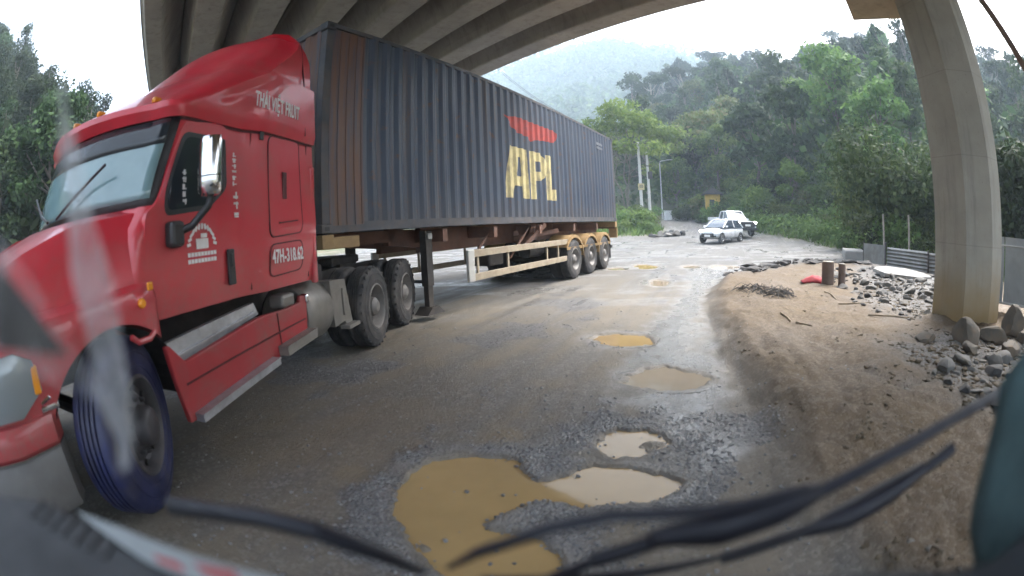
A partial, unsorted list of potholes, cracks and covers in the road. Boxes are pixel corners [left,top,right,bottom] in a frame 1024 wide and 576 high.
pothole [374,447,701,576]
pothole [584,331,661,348]
pothole [612,363,721,393]
pothole [585,423,684,462]
pothole [638,278,684,288]
